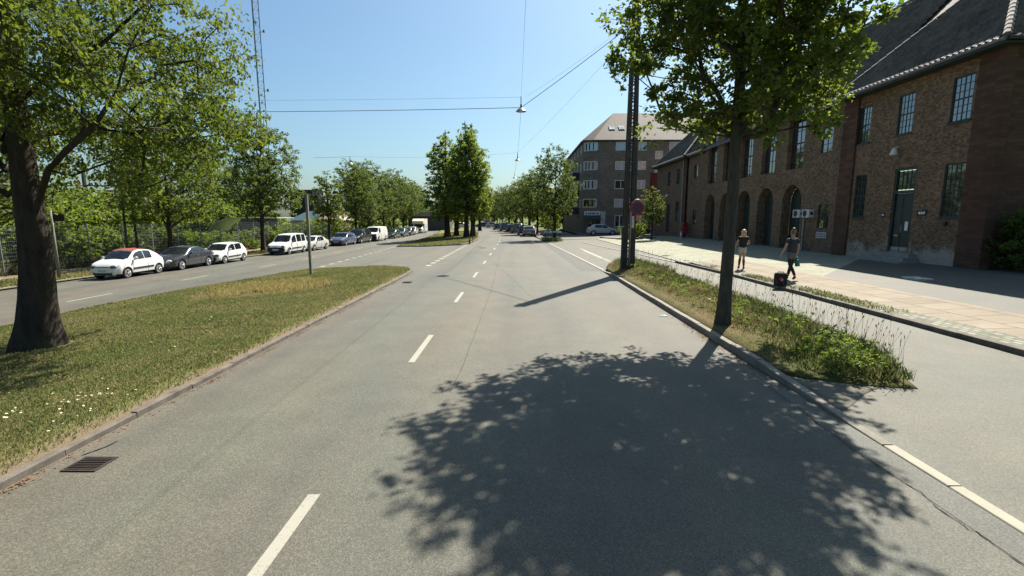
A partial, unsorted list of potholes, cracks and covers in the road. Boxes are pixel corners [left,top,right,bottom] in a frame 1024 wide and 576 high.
drain grate [60,456,118,472]
